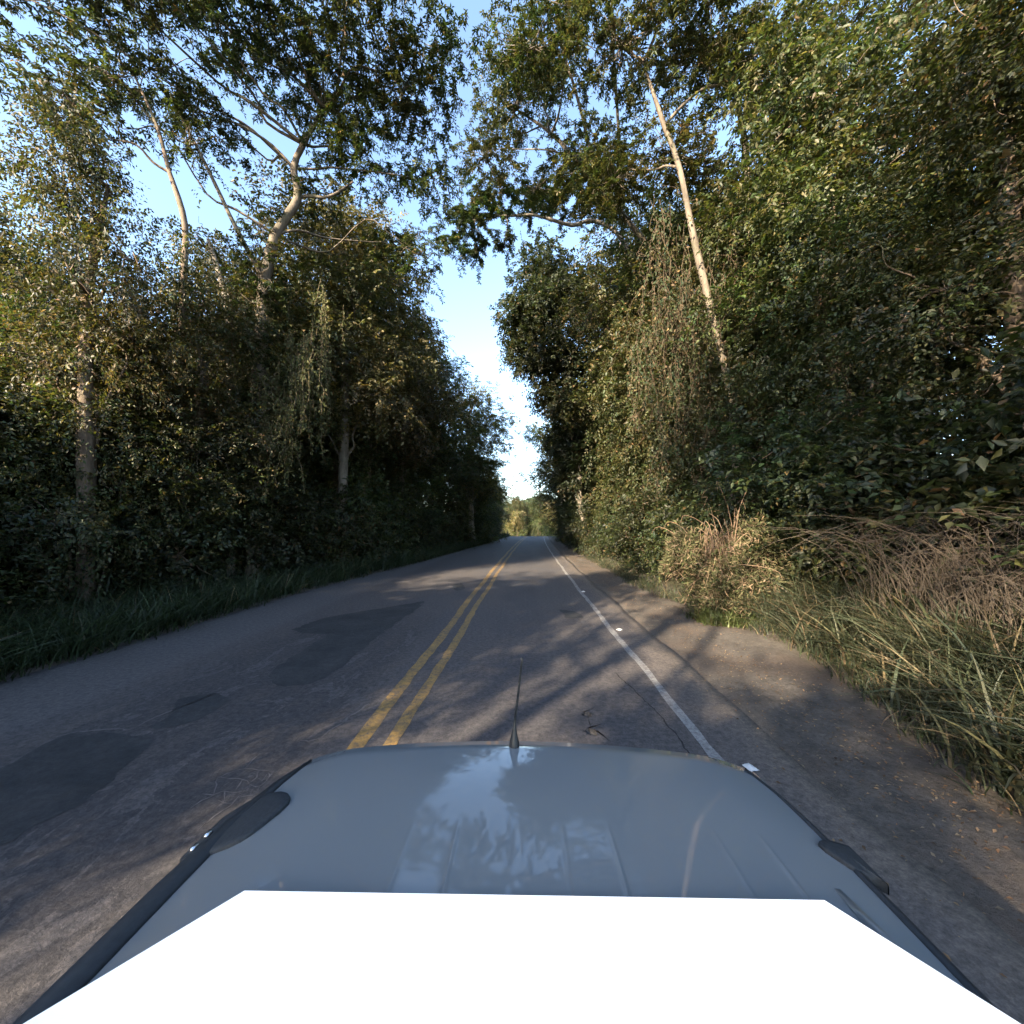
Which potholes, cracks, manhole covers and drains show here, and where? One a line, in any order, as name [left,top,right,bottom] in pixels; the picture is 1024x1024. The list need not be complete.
crack [616,673,690,754]
